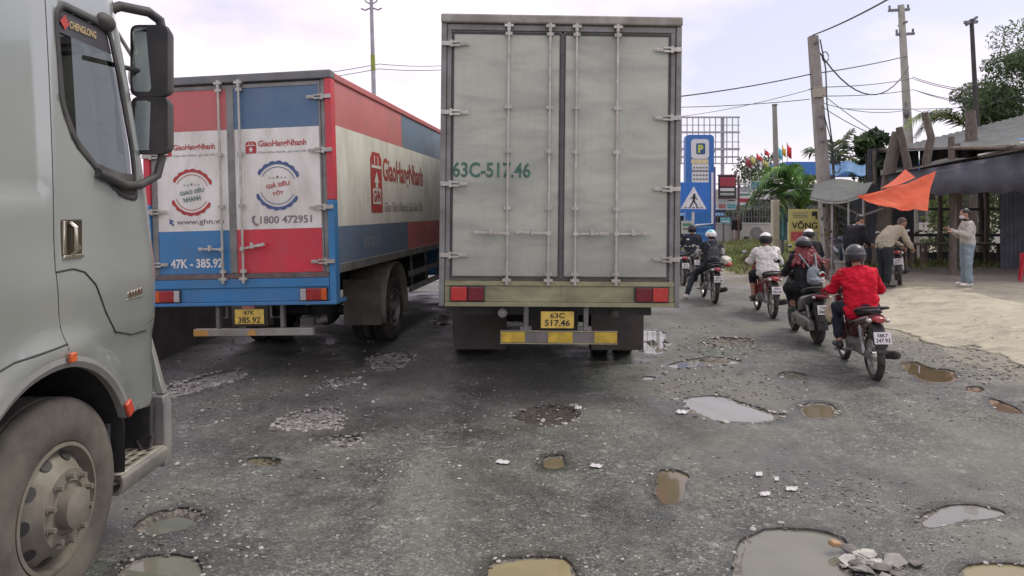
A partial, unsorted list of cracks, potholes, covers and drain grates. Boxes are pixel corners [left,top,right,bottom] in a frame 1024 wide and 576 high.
pothole [787,400,851,423]
pothole [530,451,579,474]
pothole [718,521,870,576]
pothole [944,556,1024,576]
pothole [632,329,678,357]
pothole [904,500,1018,532]
pothole [117,503,220,543]
pothole [976,396,1024,418]
pothole [499,402,593,432]
pothole [234,454,295,472]
pothole [472,550,591,576]
pothole [655,355,755,371]
